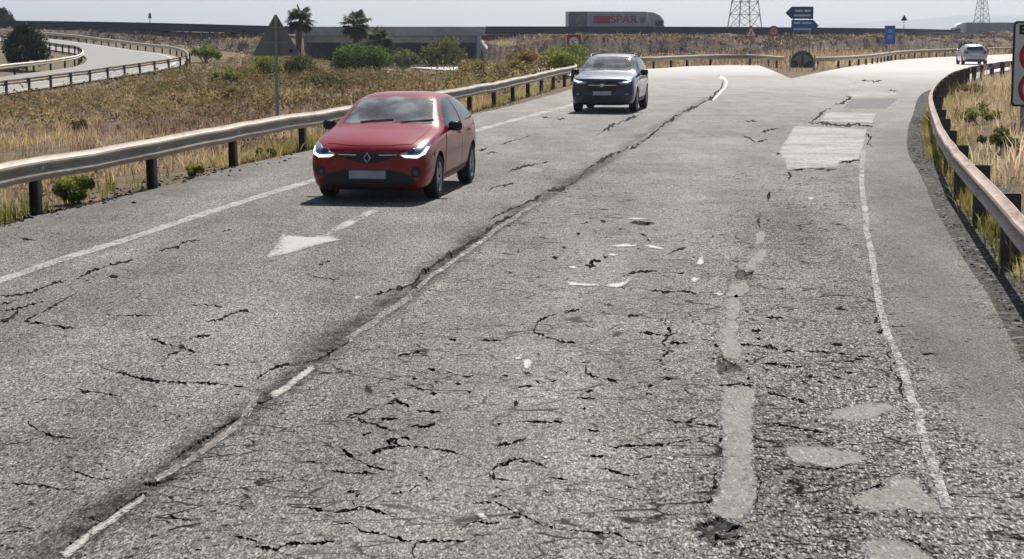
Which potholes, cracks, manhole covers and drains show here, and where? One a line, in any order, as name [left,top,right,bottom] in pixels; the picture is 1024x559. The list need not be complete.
pothole [716,355,742,375]
crack [811,96,851,123]
crack [35,304,295,401]
crack [156,239,200,253]
crack [0,257,138,330]
crack [1,420,76,445]
crack [584,233,697,295]
crack [229,302,904,558]
crack [5,467,110,490]
crack [744,120,873,181]
pothole [690,517,747,549]
